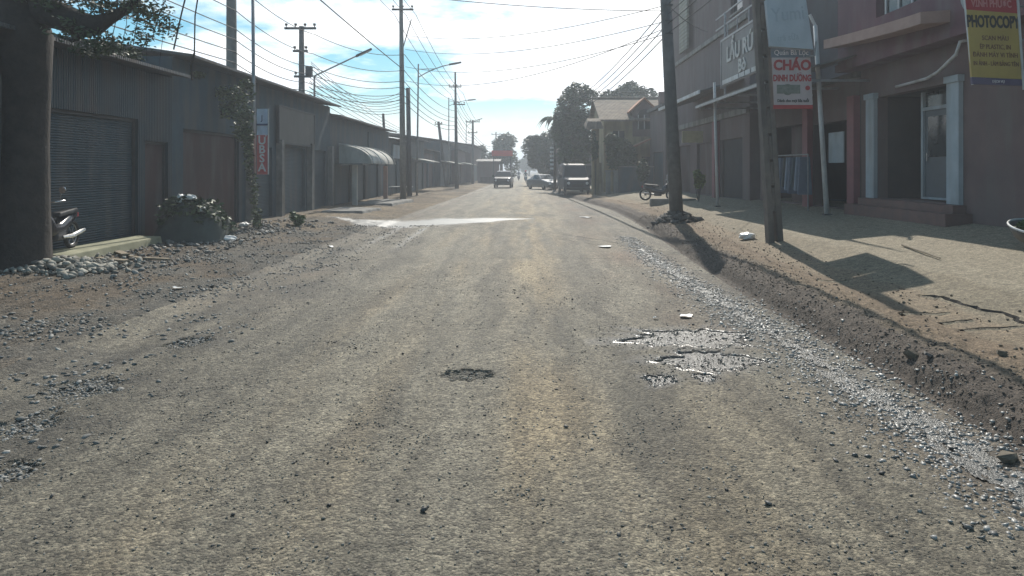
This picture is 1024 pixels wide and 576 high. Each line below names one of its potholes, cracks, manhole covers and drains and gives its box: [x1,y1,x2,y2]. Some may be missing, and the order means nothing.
crack [899,295,1024,331]
pothole [439,368,496,382]
pothole [646,349,777,375]
pothole [612,328,757,349]
pothole [641,374,679,388]
pothole [690,372,718,382]
